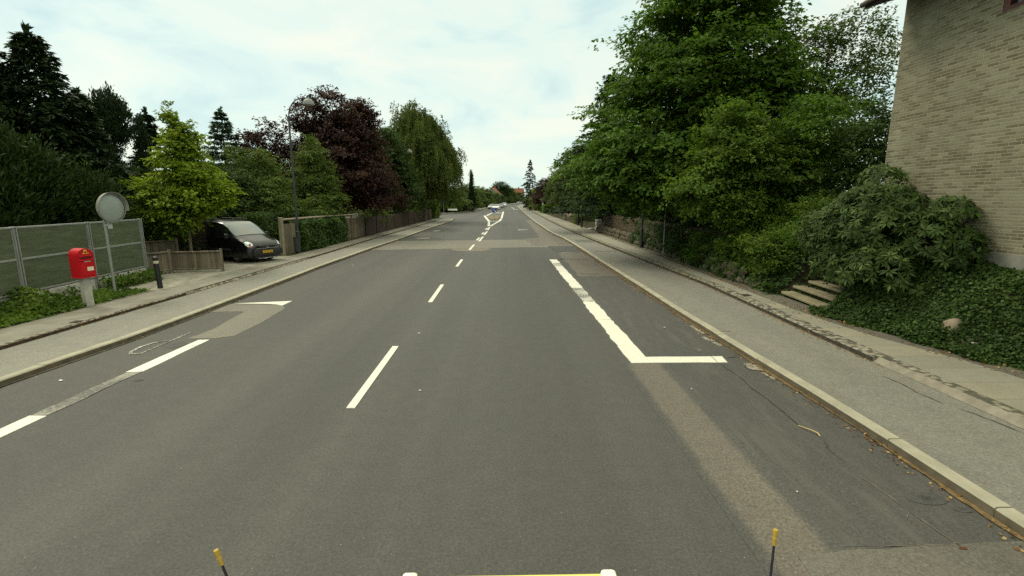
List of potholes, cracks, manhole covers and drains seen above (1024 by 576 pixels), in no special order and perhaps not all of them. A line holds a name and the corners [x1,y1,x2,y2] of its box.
crack [824,440,958,545]
crack [711,356,800,426]
